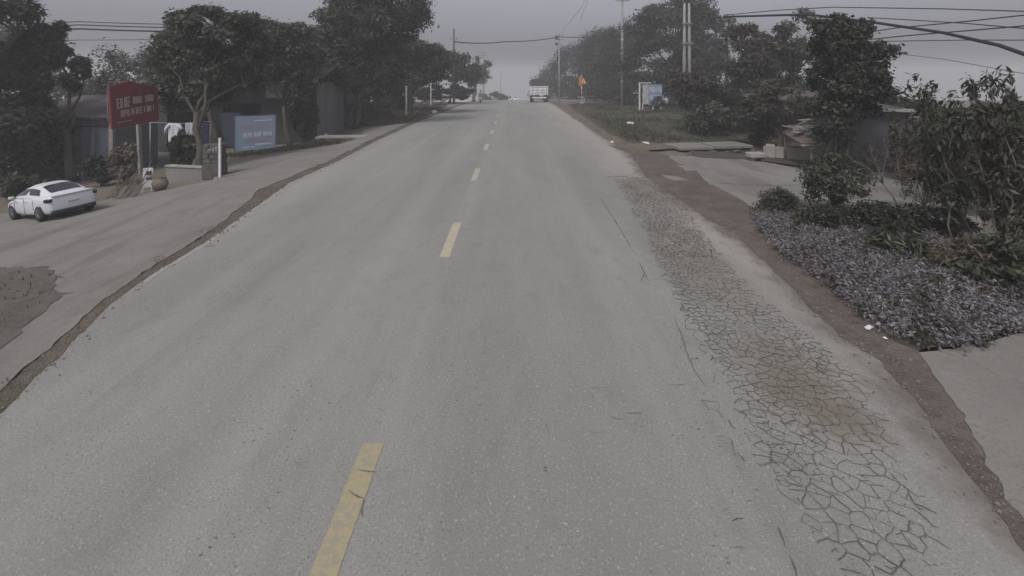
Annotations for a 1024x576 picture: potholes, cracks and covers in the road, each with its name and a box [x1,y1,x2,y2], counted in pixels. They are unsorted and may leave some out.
crack [603,178,950,576]
